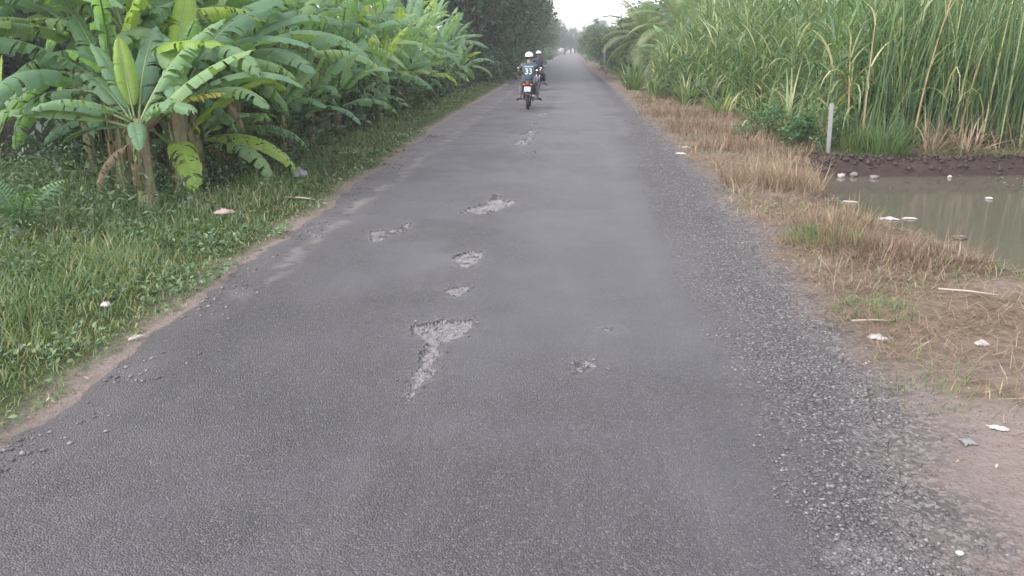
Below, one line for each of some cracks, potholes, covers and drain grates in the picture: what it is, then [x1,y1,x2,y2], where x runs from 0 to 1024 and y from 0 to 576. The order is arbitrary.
pothole [562,353,611,373]
pothole [361,222,415,243]
pothole [394,314,479,404]
pothole [441,283,477,298]
pothole [450,251,486,269]
pothole [460,191,517,215]
pothole [512,137,535,146]
